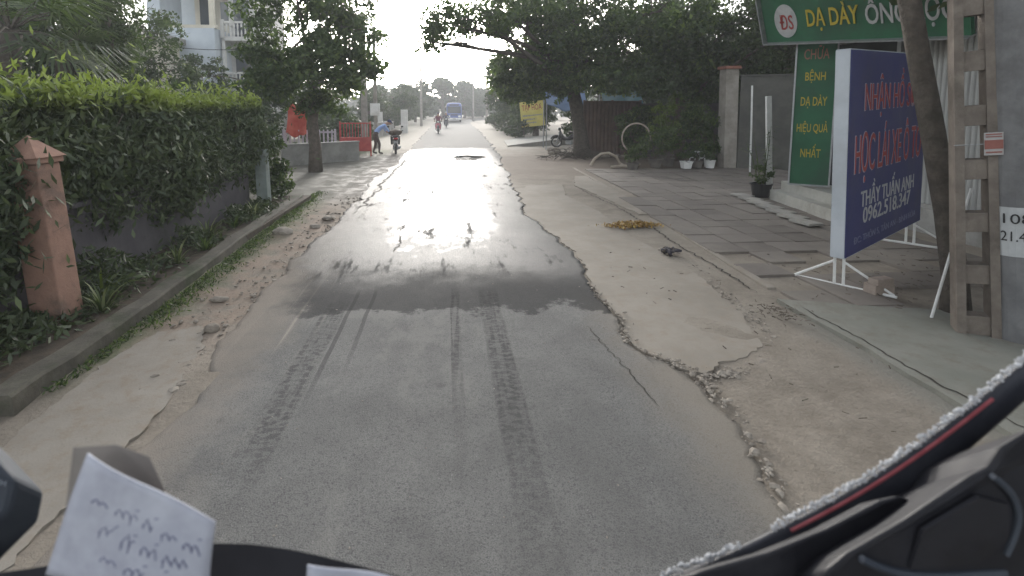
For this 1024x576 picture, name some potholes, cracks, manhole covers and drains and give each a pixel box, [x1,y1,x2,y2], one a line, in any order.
crack [590,328,658,405]
crack [360,160,406,207]
